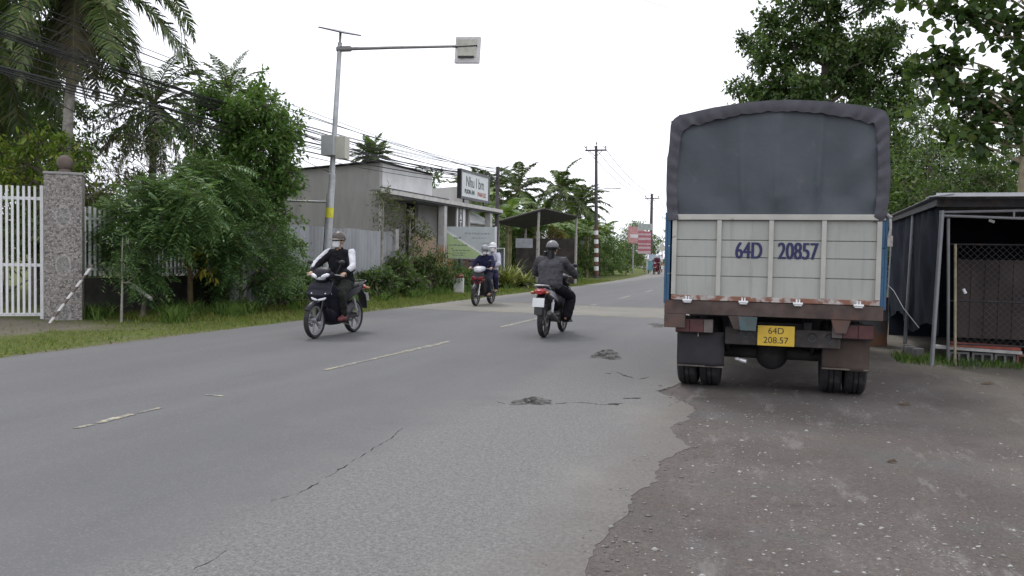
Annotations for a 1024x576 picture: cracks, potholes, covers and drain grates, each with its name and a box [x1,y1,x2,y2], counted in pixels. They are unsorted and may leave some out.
crack [497,397,640,405]
pothole [509,397,553,405]
pothole [588,349,622,360]
